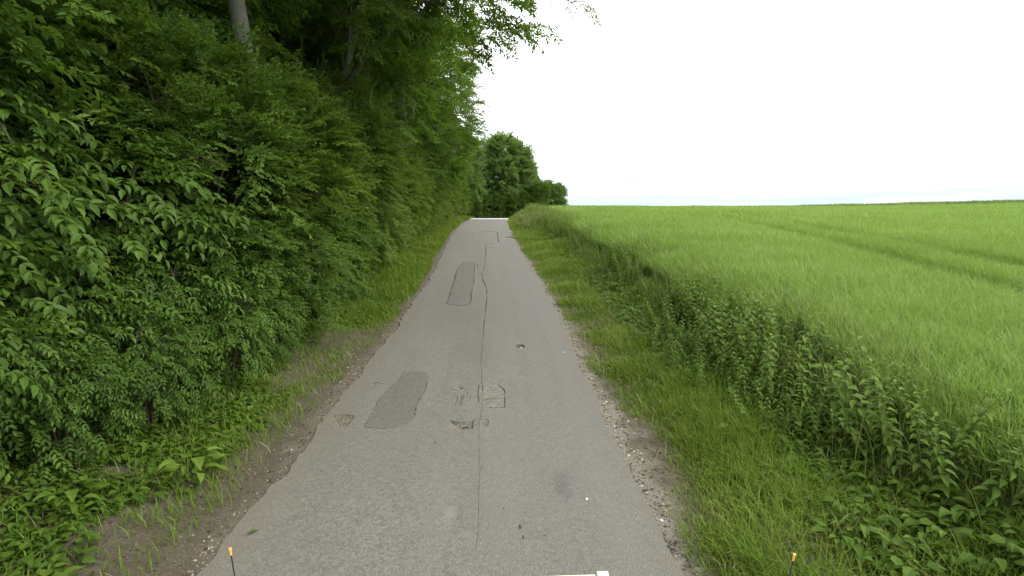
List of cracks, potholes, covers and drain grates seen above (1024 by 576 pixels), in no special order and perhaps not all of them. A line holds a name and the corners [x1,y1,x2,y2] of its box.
pothole [449,420,475,430]
crack [455,383,506,408]
pothole [330,414,354,427]
